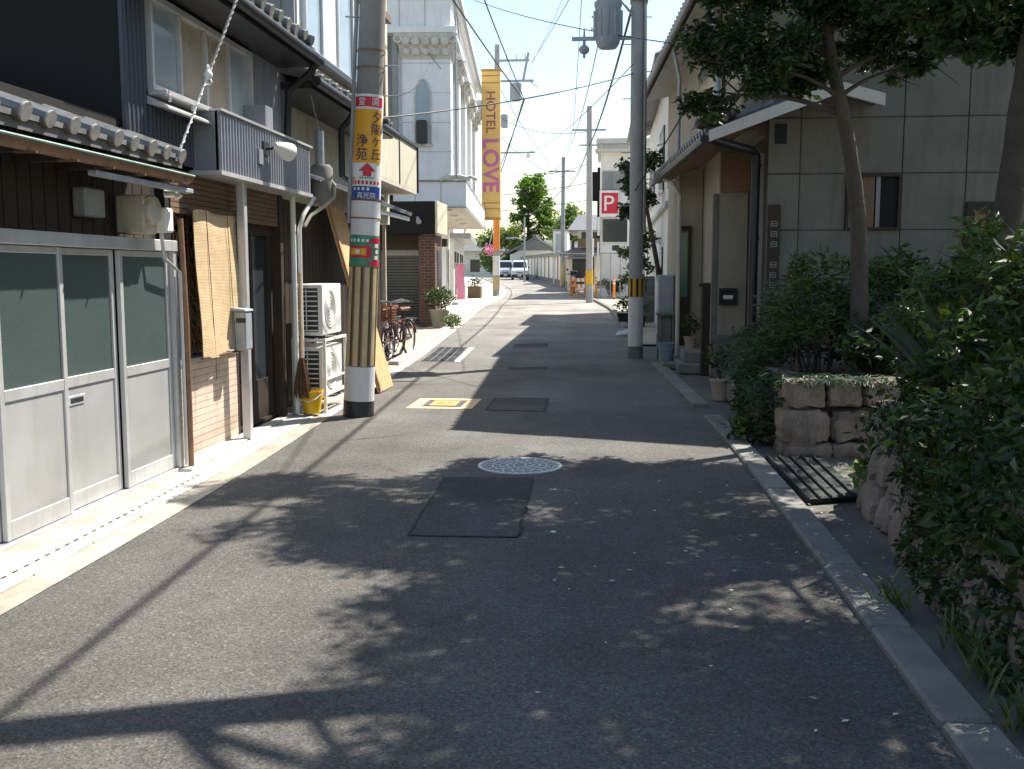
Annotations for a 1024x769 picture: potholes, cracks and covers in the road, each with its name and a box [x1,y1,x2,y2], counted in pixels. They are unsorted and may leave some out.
drain grate [421,347,468,362]
drain grate [766,454,858,504]
manhole cover [478,457,562,475]
